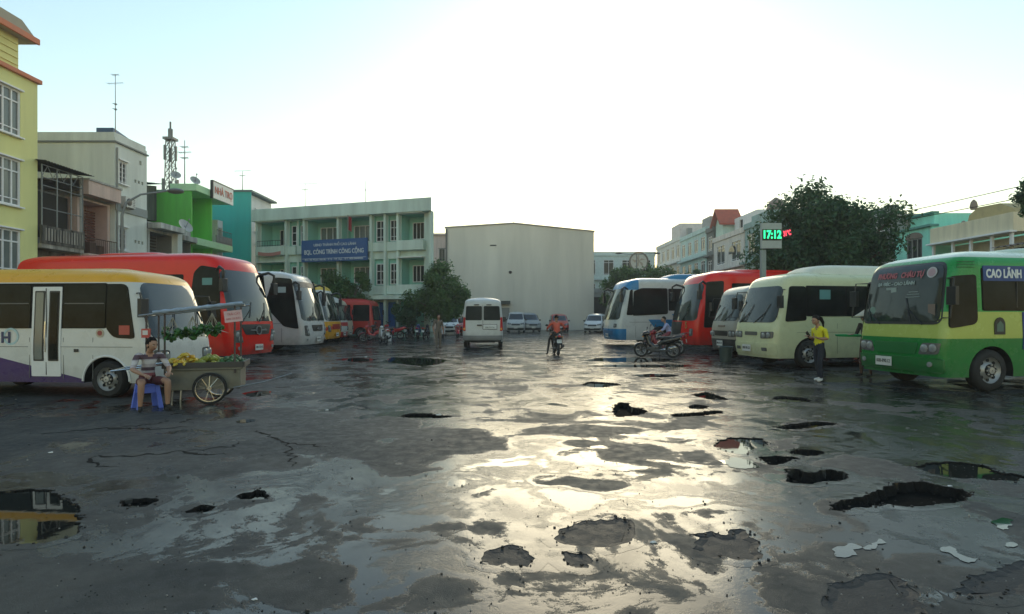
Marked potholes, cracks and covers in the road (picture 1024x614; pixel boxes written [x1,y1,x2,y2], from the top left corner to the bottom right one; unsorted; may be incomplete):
pothole [675,524,780,568]
pothole [749,453,809,468]
pothole [768,420,847,431]
pothole [605,401,655,418]
pothole [548,545,610,575]
pothole [0,485,103,550]
pothole [223,487,282,504]
pothole [704,436,776,456]
pothole [902,459,1024,484]
pothole [105,494,173,512]
pothole [815,478,987,516]
crack [86,430,334,467]
